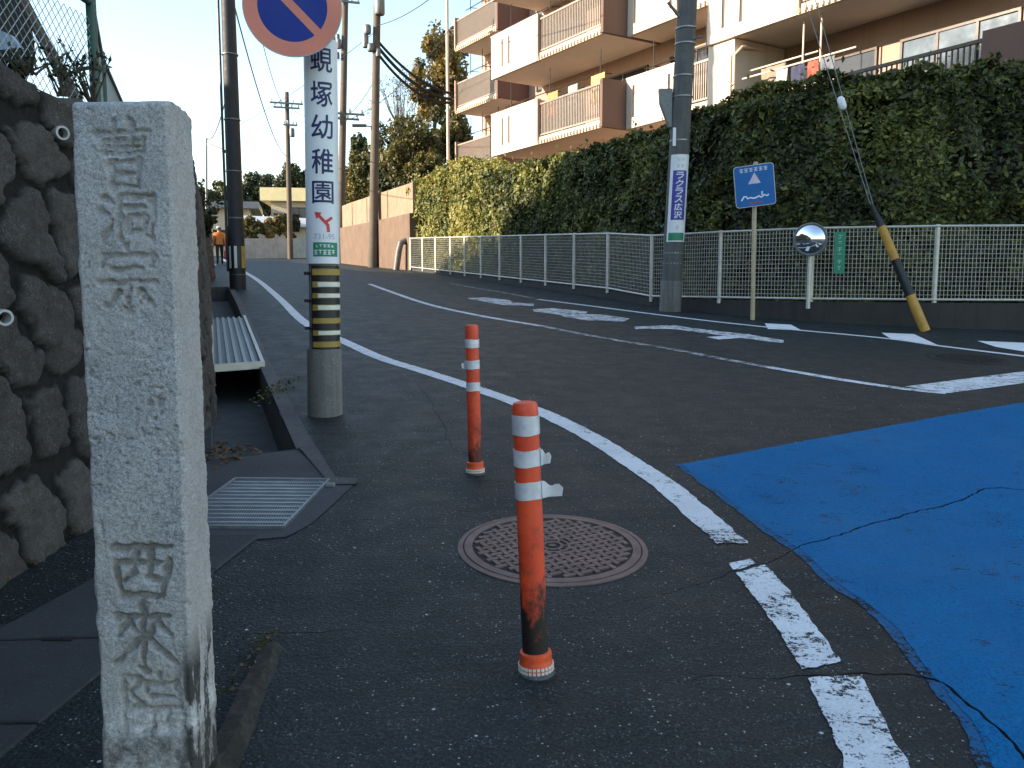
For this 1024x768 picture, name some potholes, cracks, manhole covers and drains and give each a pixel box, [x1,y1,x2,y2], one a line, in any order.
manhole cover [458,514,648,587]
crack [557,672,1024,760]
drain grate [207,477,331,529]
crack [380,488,990,679]
manhole cover [926,353,1012,365]
